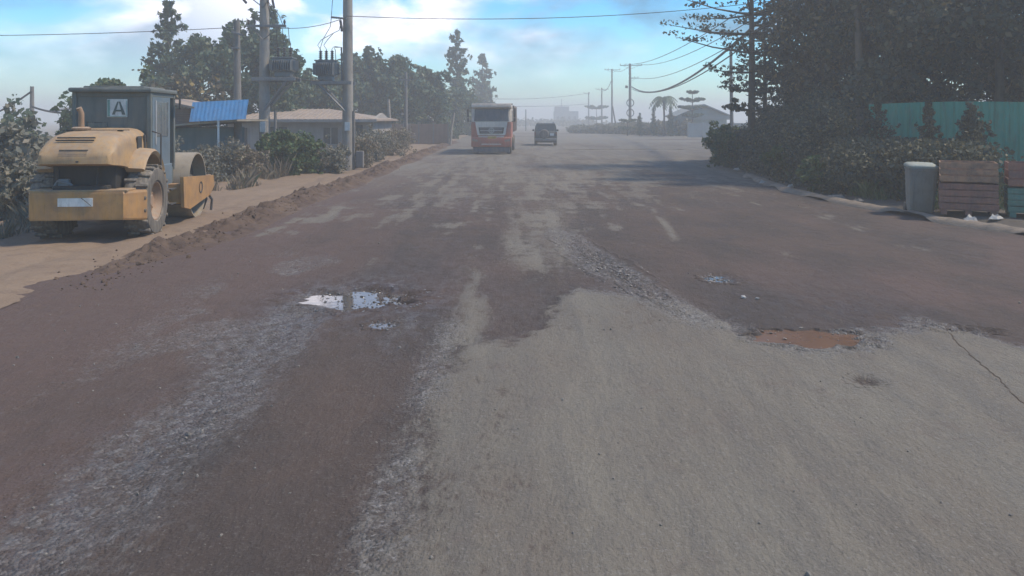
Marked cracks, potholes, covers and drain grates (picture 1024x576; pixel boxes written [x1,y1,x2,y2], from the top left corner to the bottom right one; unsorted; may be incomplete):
pothole [693,272,749,285]
pothole [265,282,446,316]
pothole [359,319,403,332]
pothole [736,327,891,352]
pothole [840,371,894,389]
crack [945,327,1024,403]
